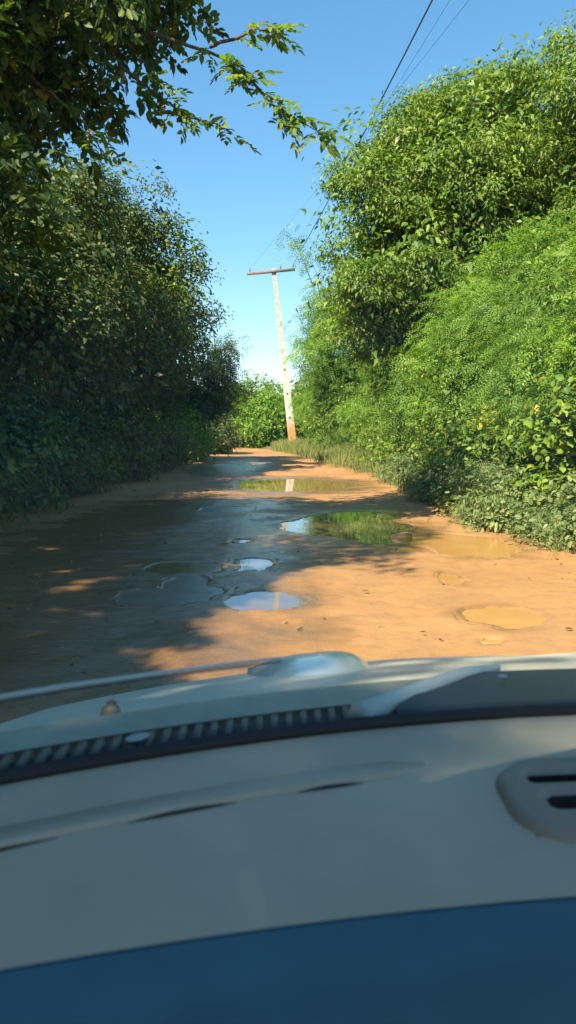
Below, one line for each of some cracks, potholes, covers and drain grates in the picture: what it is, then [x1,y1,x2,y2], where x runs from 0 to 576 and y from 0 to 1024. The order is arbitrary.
pothole [271,511,422,546]
pothole [220,556,280,572]
pothole [452,604,554,631]
pothole [230,478,357,492]
pothole [390,531,534,561]
pothole [105,573,233,609]
pothole [135,560,241,575]
pothole [209,588,318,613]
pothole [435,571,468,586]
